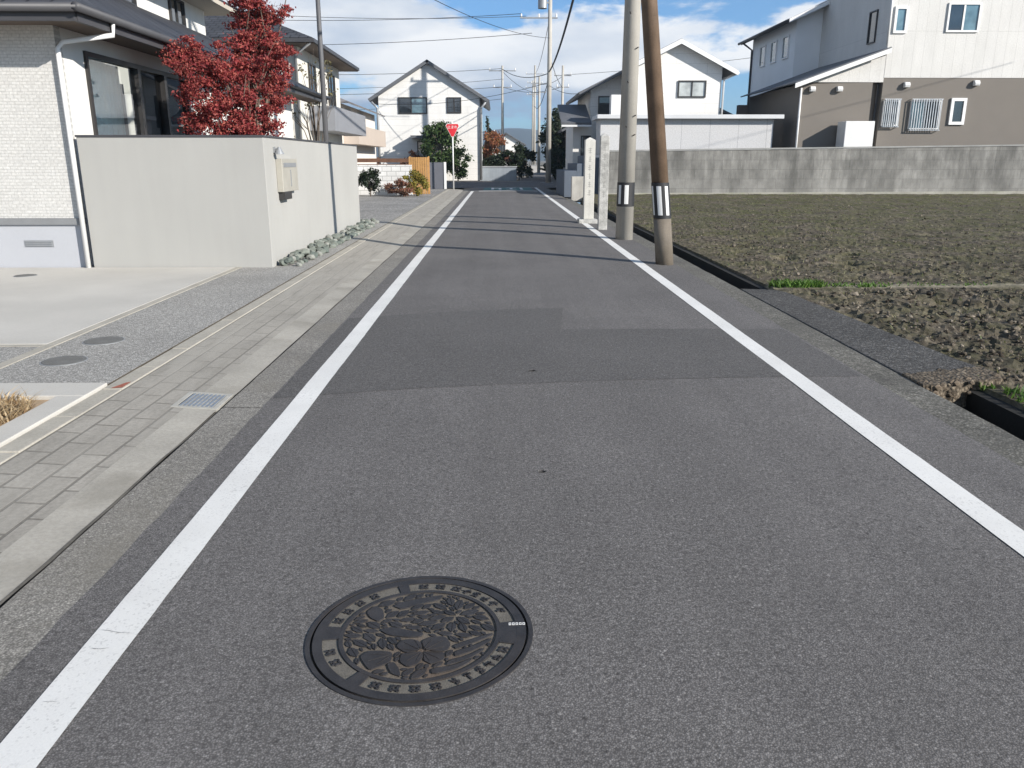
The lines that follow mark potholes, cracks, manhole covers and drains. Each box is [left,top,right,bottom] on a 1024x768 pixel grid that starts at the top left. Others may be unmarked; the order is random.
drain grate [170,391,234,412]
manhole cover [305,576,533,707]
manhole cover [82,336,125,345]
manhole cover [39,355,89,366]
